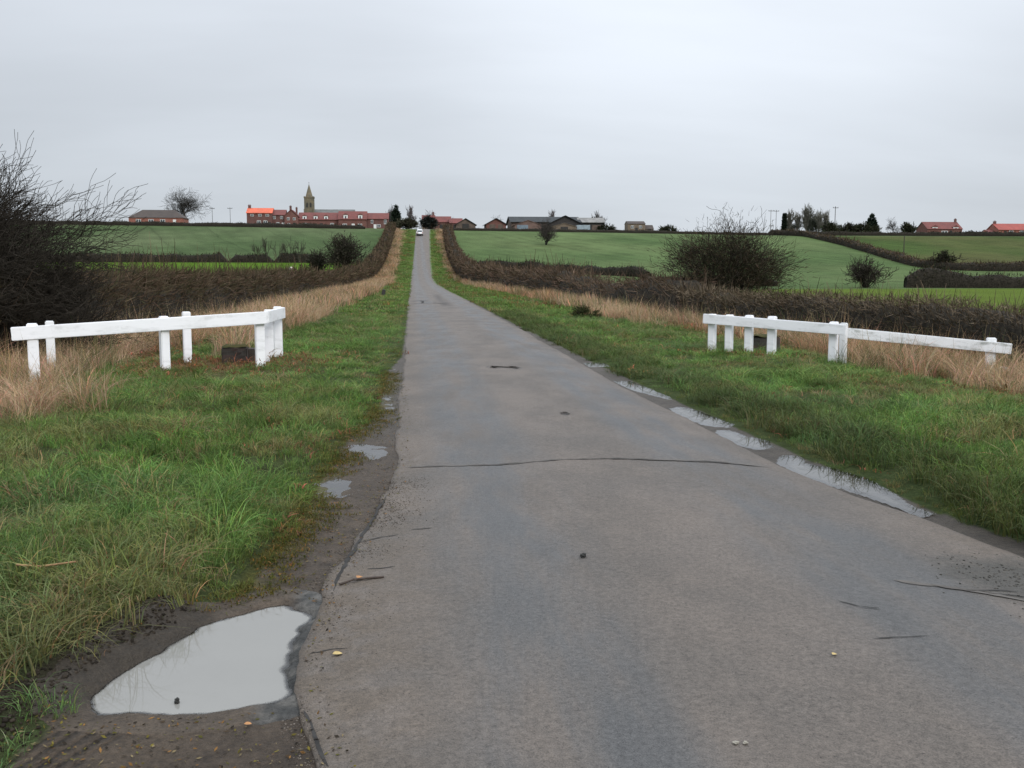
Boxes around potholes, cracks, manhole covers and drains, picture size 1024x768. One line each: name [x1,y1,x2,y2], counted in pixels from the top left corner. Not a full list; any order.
crack [333,497,398,591]
crack [414,458,768,467]
crack [893,579,1024,601]
